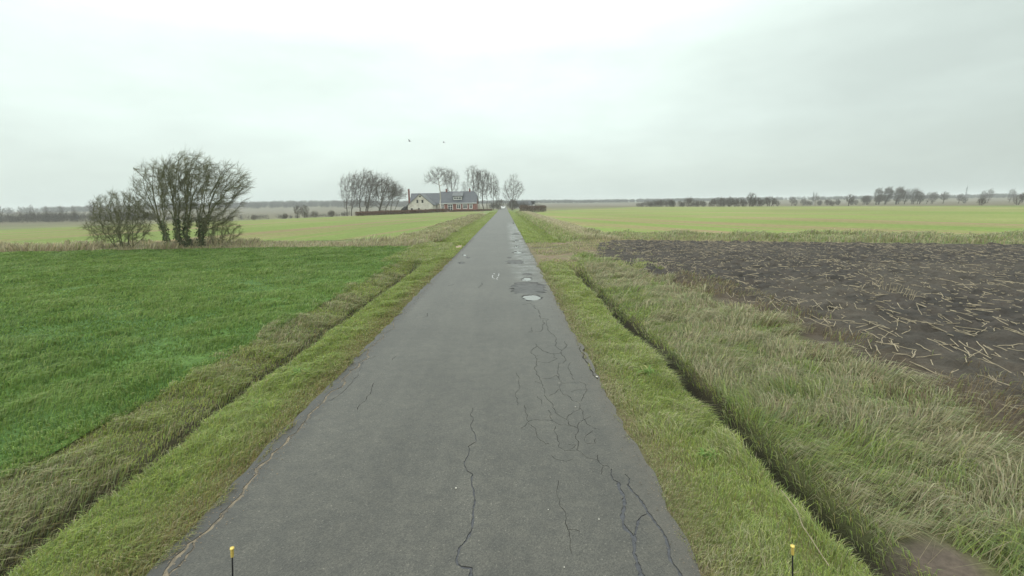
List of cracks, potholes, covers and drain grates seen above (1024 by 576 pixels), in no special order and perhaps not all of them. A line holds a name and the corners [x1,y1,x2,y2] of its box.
crack [455,419,477,576]
crack [516,317,682,576]
